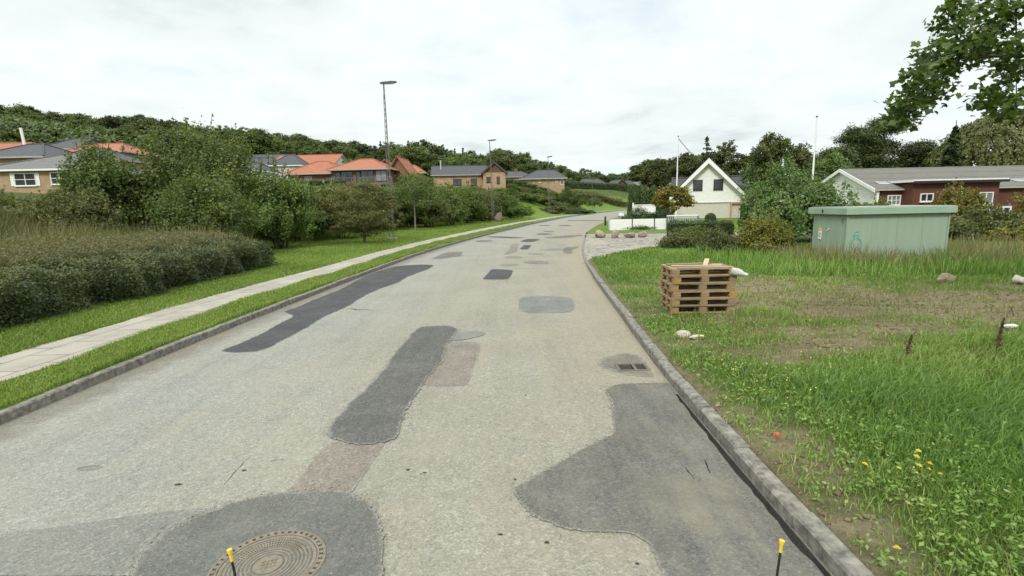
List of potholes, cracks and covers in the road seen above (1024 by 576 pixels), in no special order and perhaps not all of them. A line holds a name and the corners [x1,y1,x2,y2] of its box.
manhole cover [207,530,326,576]
drain grate [614,363,650,371]
